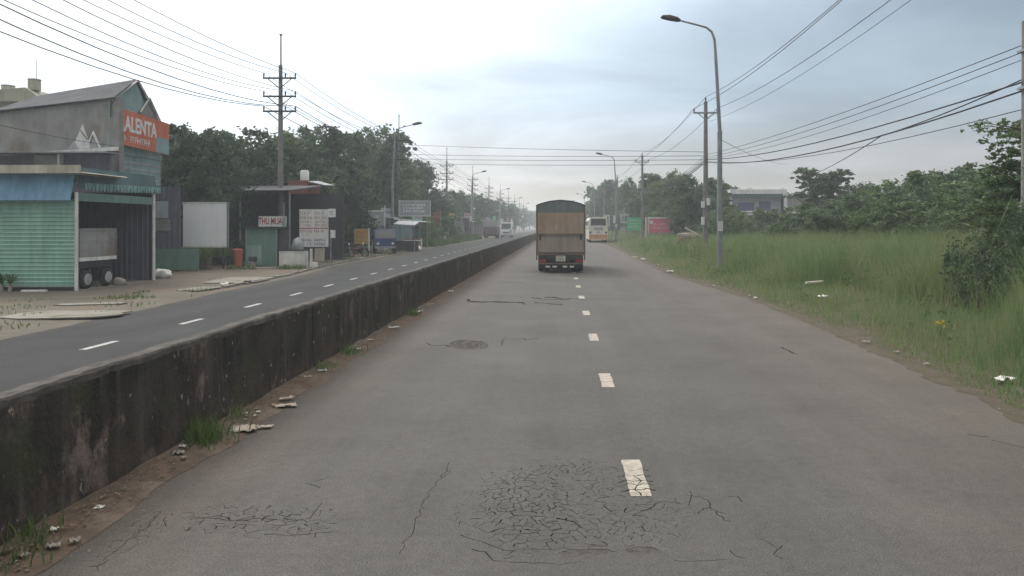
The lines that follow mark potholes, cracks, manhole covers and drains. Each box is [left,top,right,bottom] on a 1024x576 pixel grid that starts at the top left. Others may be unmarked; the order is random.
crack [452,457,743,565]
crack [179,477,343,540]
crack [84,511,173,571]
crack [467,297,573,305]
pothole [449,340,488,349]
crack [401,464,450,551]
